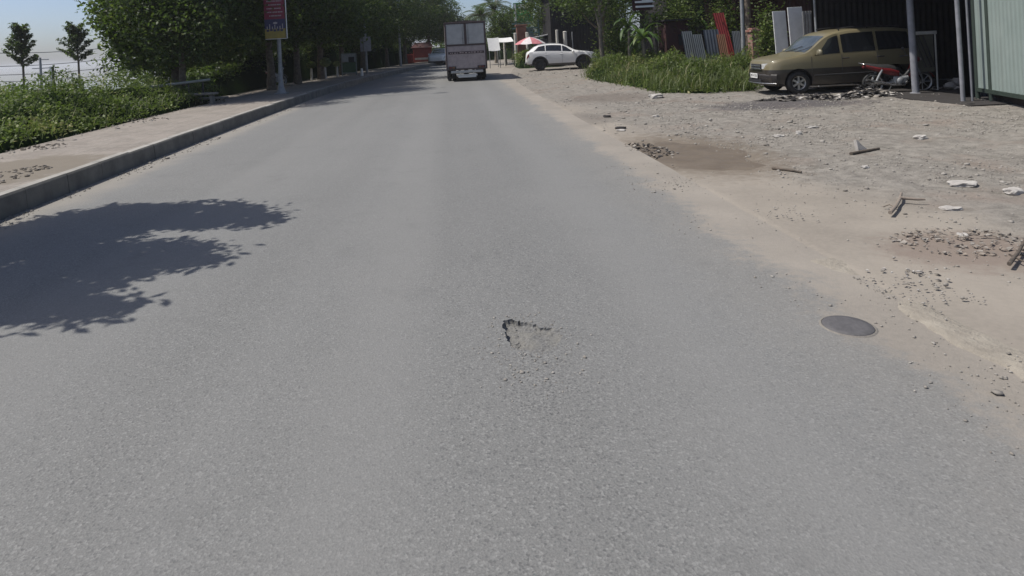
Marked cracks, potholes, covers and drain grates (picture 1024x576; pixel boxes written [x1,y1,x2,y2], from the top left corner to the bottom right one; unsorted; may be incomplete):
pothole [502,319,563,353]
manhole cover [819,315,879,338]
